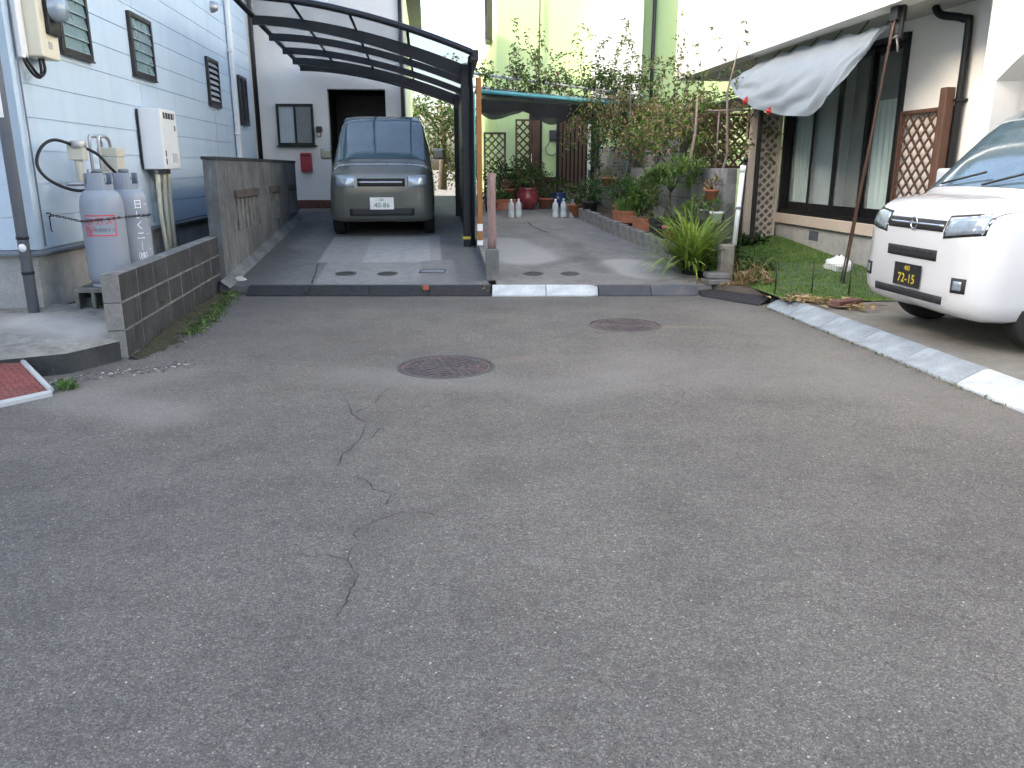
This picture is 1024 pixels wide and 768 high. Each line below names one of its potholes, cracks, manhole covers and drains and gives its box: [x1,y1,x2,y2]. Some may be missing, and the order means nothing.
crack [296,387,446,619]
manhole cover [396,355,495,379]
manhole cover [588,318,662,332]
